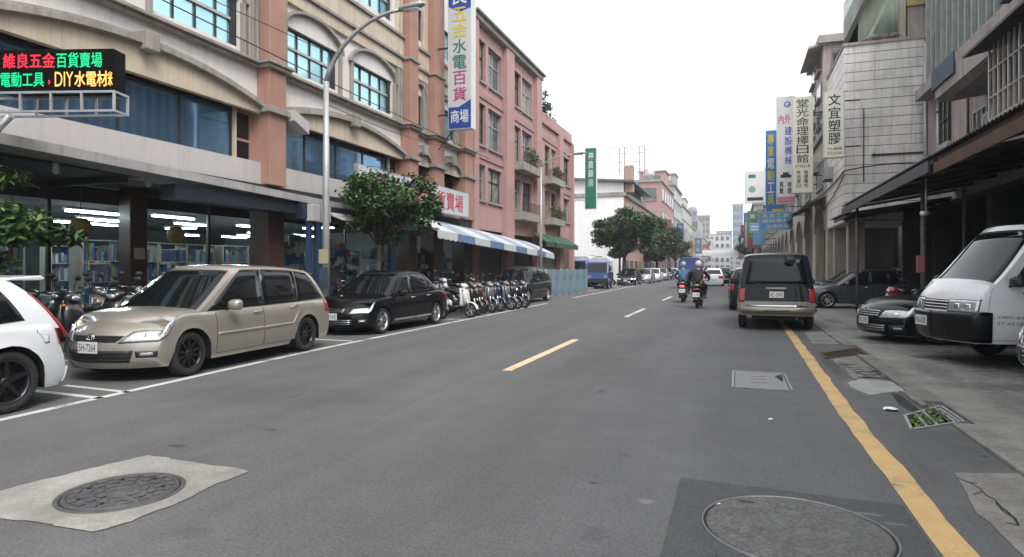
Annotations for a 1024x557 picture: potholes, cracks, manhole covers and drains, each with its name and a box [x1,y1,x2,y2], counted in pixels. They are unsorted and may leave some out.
manhole cover [52,473,186,514]
drain grate [903,405,965,430]
crack [958,478,1019,525]
manhole cover [702,495,902,557]
manhole cover [732,370,793,392]
drain grate [820,348,867,359]
